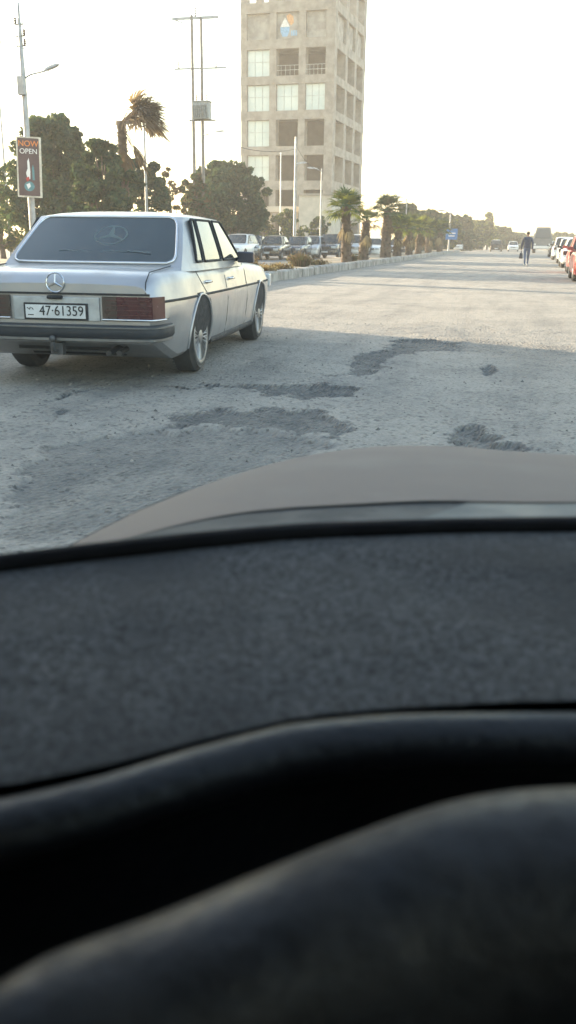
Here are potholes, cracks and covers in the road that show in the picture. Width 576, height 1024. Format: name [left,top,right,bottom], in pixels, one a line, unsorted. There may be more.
pothole [480,364,499,376]
pothole [154,406,358,439]
pothole [328,339,464,376]
pothole [445,423,542,452]
pothole [199,382,363,401]
